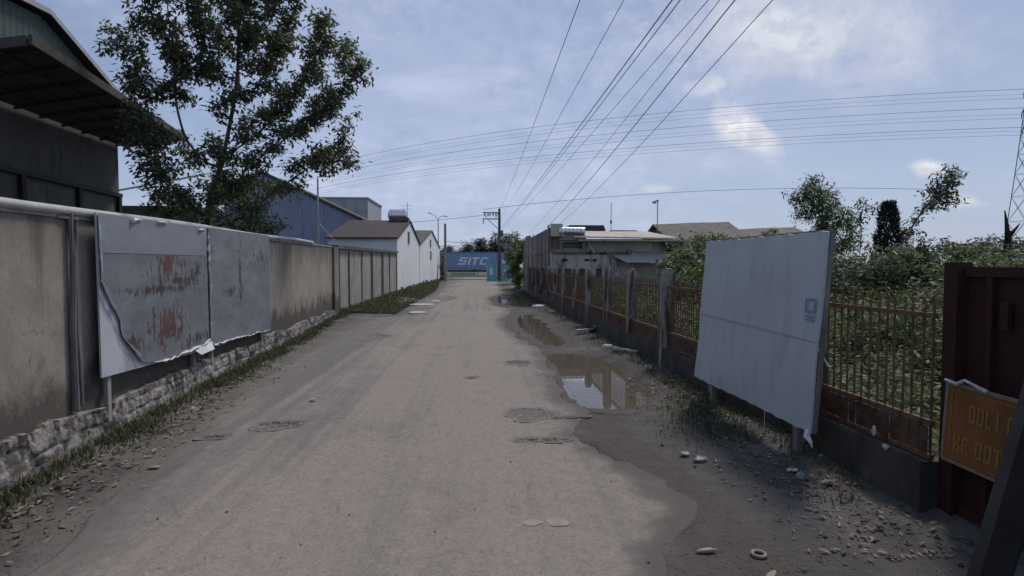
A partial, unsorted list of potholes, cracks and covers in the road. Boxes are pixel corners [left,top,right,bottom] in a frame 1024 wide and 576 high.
pothole [503,407,559,422]
pothole [541,351,688,415]
pothole [248,420,303,432]
pothole [502,311,594,349]
